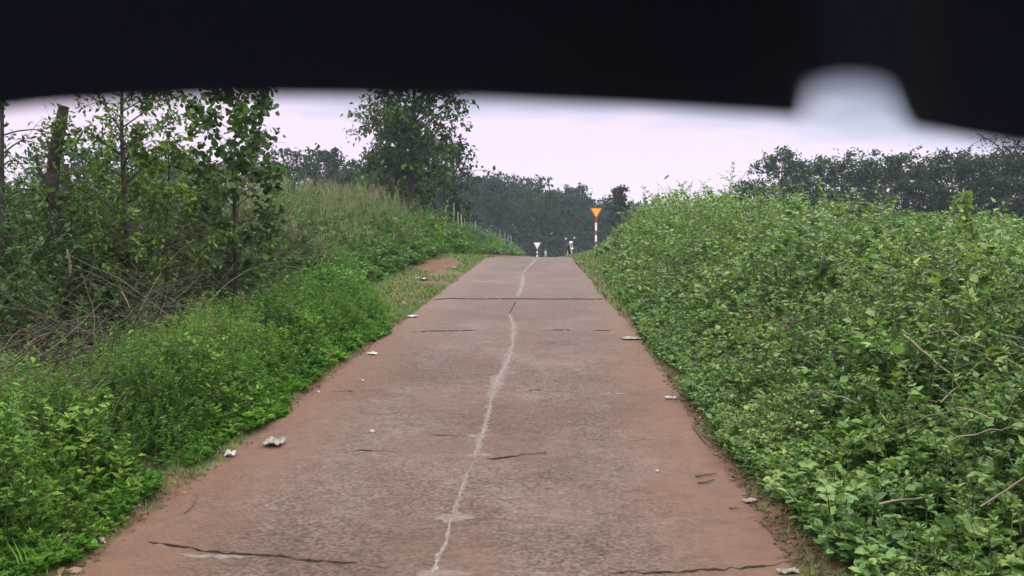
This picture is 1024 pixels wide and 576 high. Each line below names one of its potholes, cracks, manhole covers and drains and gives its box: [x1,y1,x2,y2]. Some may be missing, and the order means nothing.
crack [416,259,546,576]
